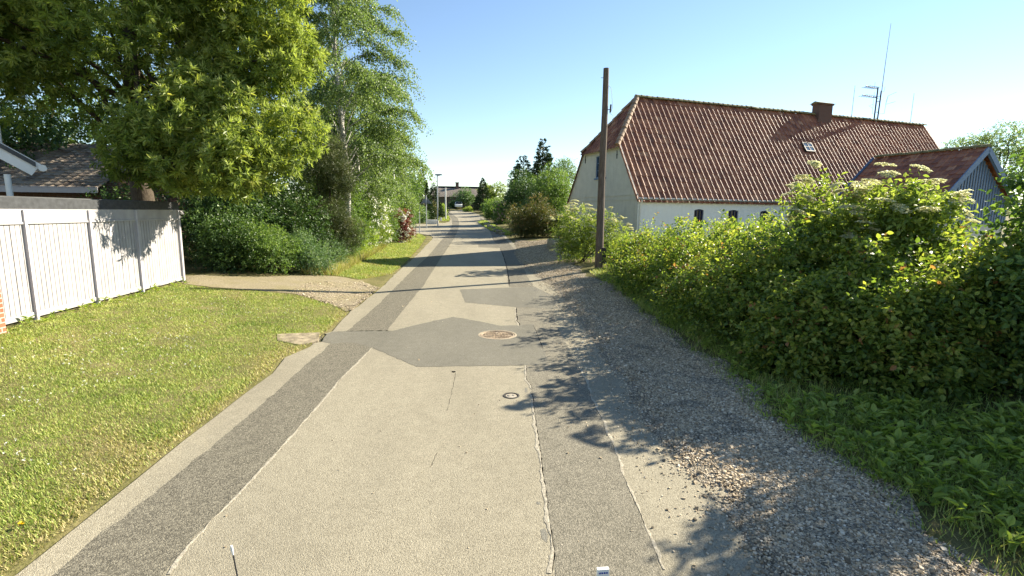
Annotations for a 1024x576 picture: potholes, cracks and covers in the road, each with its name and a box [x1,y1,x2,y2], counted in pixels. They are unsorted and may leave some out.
manhole cover [478,330,517,340]
